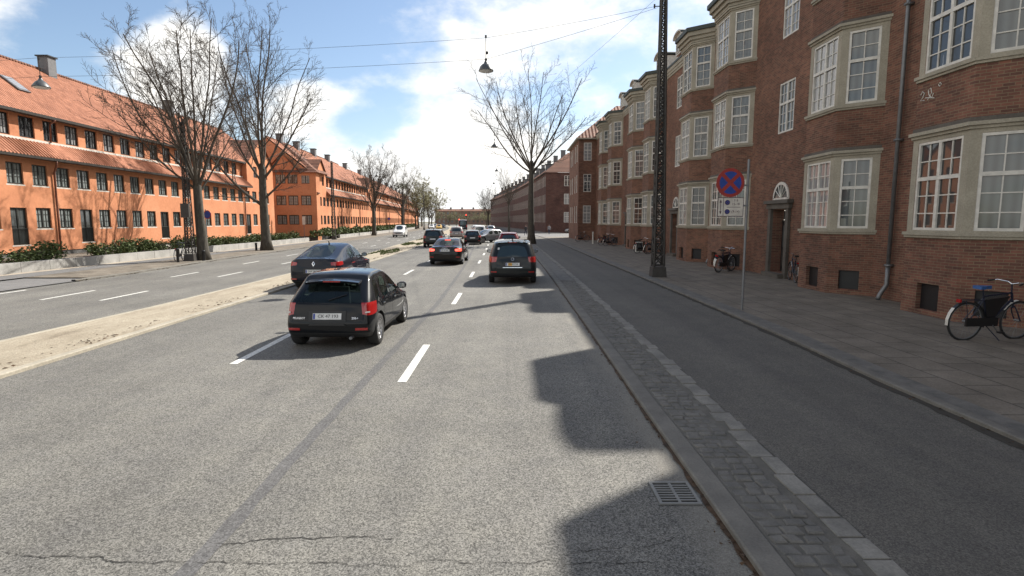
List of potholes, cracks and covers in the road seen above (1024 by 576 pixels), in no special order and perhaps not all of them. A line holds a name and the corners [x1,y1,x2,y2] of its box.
crack [7,537,675,567]
drain grate [648,481,703,505]
